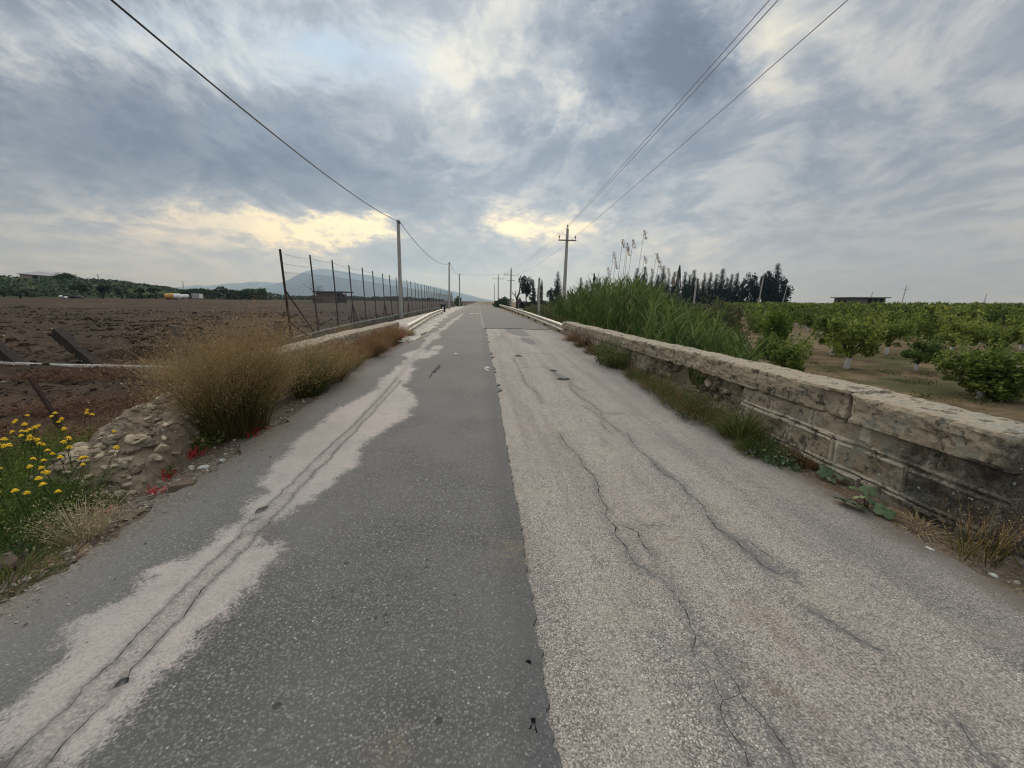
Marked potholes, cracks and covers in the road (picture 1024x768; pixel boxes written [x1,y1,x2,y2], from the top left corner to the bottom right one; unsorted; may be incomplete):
crack [551,370,797,581]
crack [560,434,795,768]
